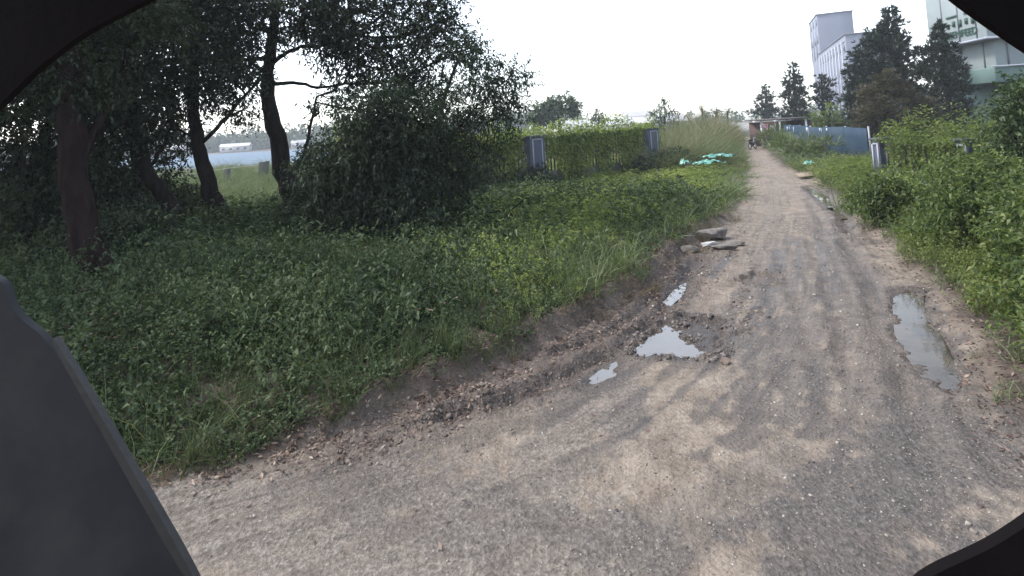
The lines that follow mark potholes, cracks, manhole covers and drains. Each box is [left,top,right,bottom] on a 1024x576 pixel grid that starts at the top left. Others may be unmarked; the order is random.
pothole [620,311,733,361]
pothole [885,287,971,394]
